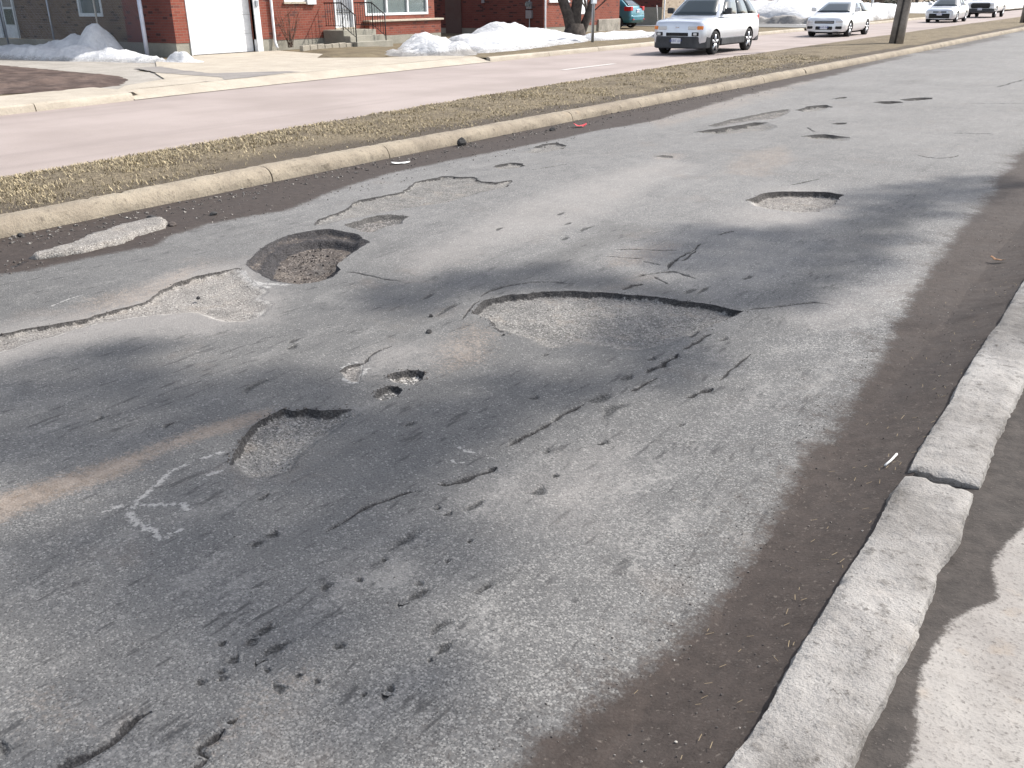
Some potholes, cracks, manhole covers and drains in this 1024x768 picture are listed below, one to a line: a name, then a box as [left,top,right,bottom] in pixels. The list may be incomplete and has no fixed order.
pothole [246,229,370,284]
pothole [471,291,743,353]
pothole [314,176,513,226]
crack [630,334,751,399]
pothole [345,214,408,233]
pothole [373,386,403,402]
crack [606,231,734,290]
pothole [340,363,364,382]
pothole [746,191,843,213]
pothole [708,109,791,127]
pothole [0,268,276,353]
